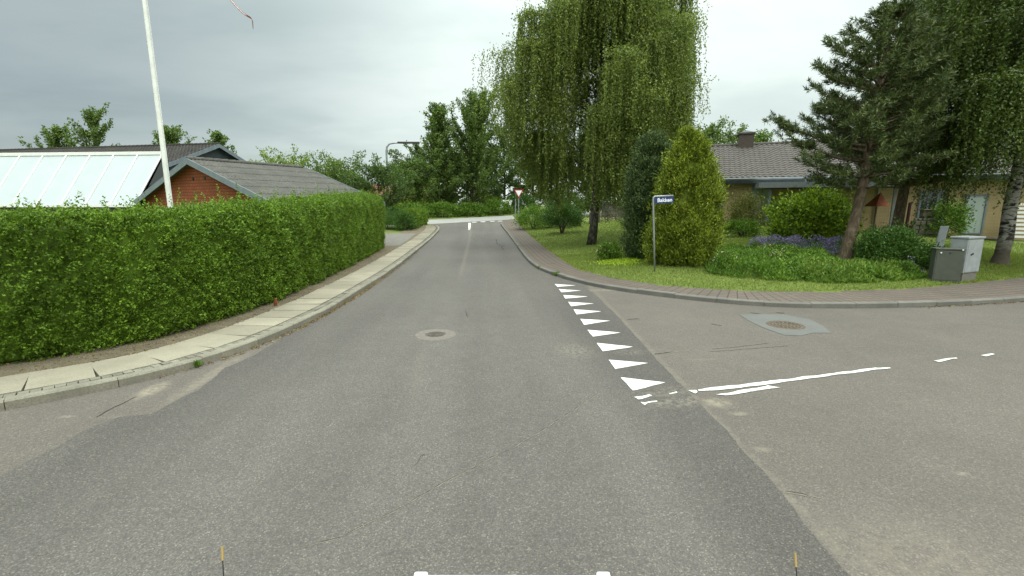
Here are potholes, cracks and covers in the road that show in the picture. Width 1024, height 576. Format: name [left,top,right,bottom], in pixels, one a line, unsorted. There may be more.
manhole cover [766,321,806,330]
manhole cover [415,329,456,340]
